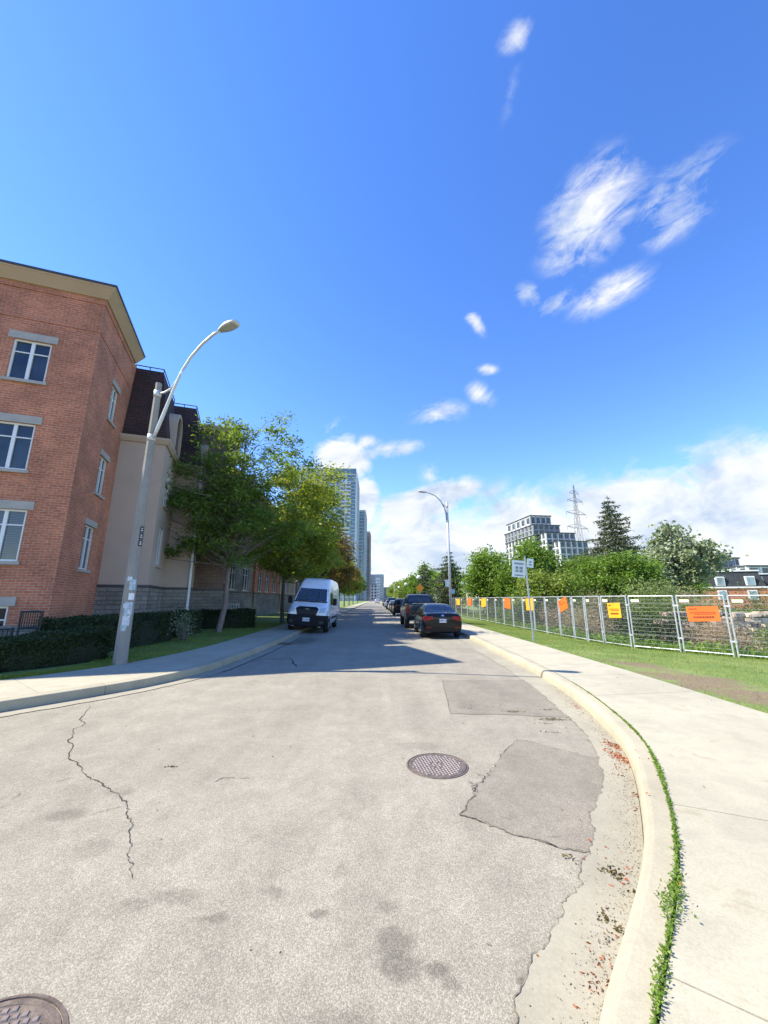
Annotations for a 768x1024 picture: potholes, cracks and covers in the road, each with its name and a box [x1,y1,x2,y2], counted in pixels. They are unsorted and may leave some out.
manhole cover [0,993,69,1024]
manhole cover [406,753,469,779]
crack [57,706,134,873]
